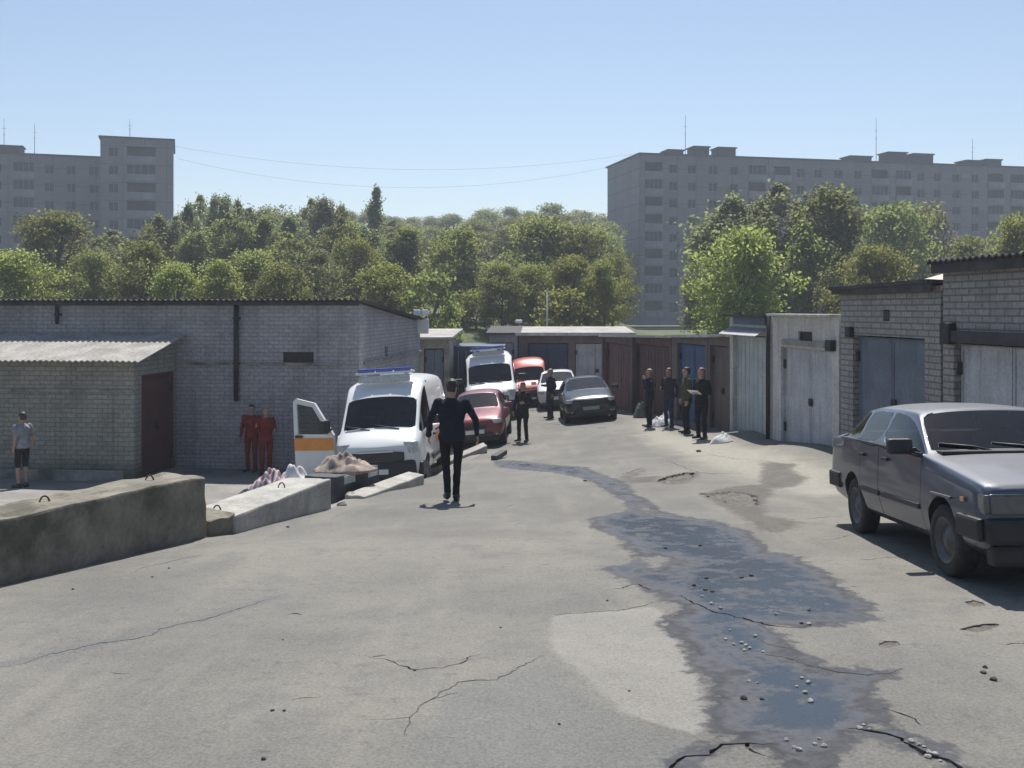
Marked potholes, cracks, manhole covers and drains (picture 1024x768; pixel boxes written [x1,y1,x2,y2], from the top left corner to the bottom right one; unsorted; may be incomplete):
crack [370,655,541,736]
pothole [960,624,999,633]
crack [2,596,280,667]
crack [682,595,902,675]
pothole [657,472,694,484]
crack [669,743,771,768]
pothole [699,491,761,507]
crack [848,708,963,768]
